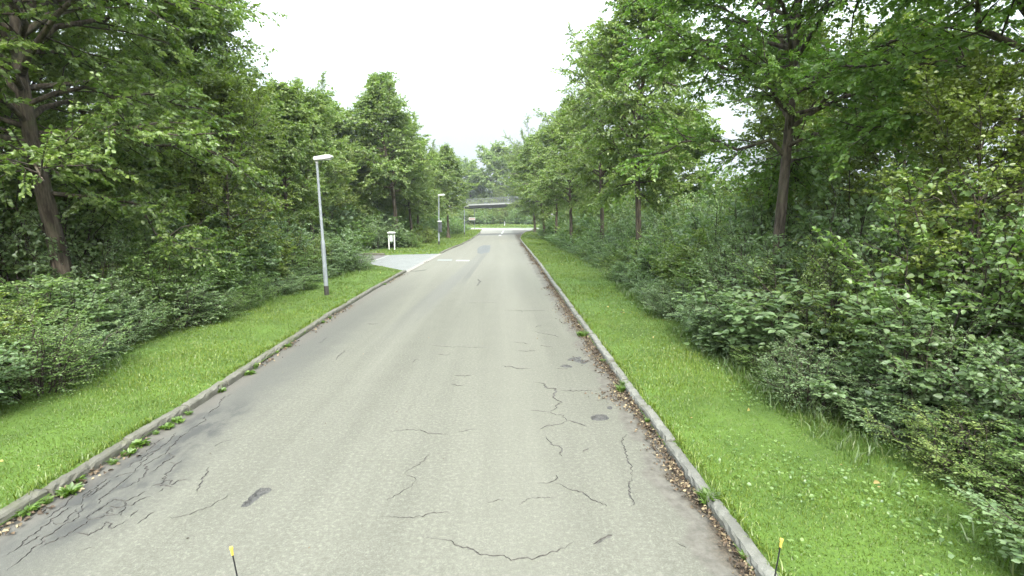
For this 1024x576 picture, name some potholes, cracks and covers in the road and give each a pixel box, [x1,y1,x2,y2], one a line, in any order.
crack [381,455,446,518]
crack [505,366,592,456]
crack [621,435,635,505]
crack [416,536,574,561]
crack [522,475,607,506]
crack [2,416,234,570]
